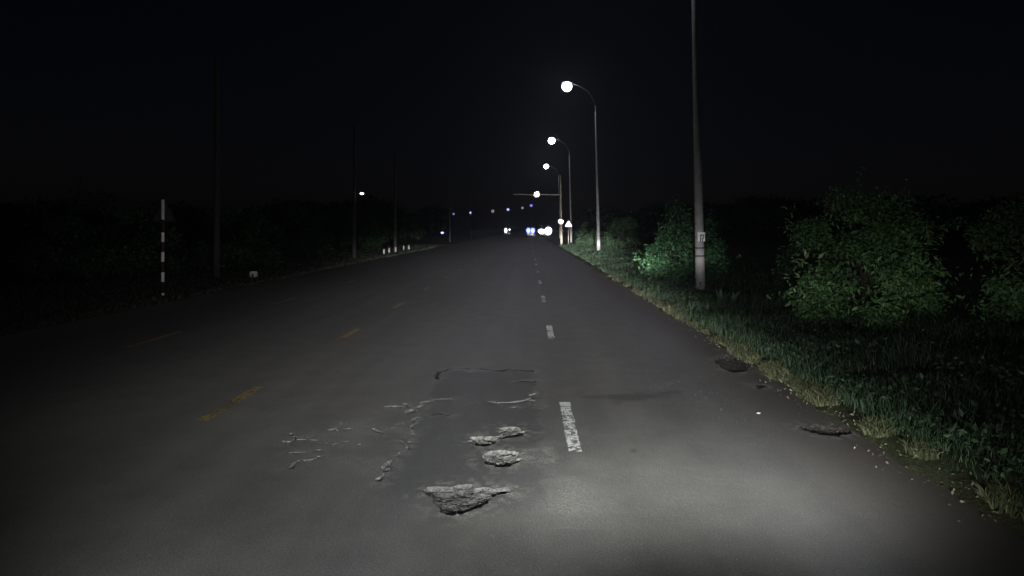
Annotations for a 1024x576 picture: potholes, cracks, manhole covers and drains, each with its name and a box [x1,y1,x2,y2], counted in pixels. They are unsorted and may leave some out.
crack [434,368,539,408]
pothole [423,484,510,516]
pothole [799,426,853,437]
crack [279,399,450,482]
pothole [482,450,521,468]
pothole [468,436,498,447]
pothole [494,426,526,439]
pothole [713,356,750,373]
